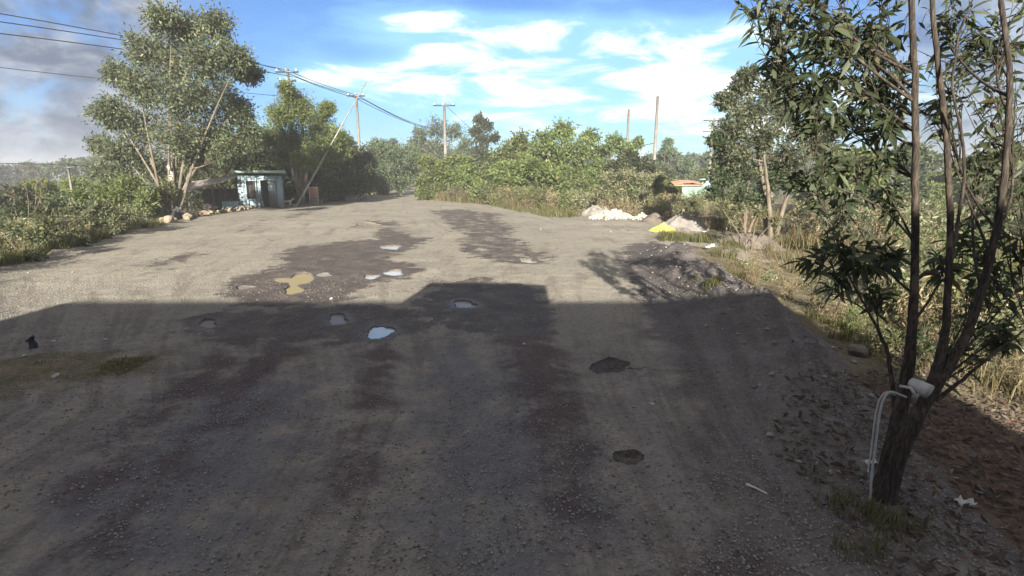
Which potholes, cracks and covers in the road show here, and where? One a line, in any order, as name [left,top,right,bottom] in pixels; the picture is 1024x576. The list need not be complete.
pothole [366,326,396,339]
pothole [270,271,315,295]
pothole [328,313,348,324]
pothole [589,357,631,374]
pothole [612,449,645,465]
pothole [198,318,217,328]
pothole [454,299,479,308]
